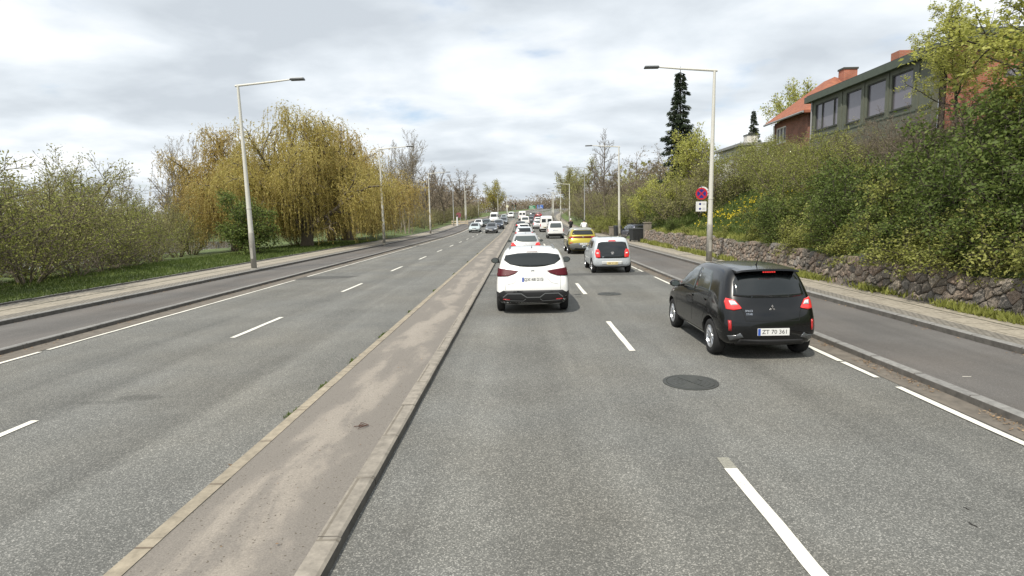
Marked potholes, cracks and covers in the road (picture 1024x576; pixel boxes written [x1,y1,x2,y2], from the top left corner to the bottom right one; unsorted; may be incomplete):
manhole cover [663,375,719,390]
